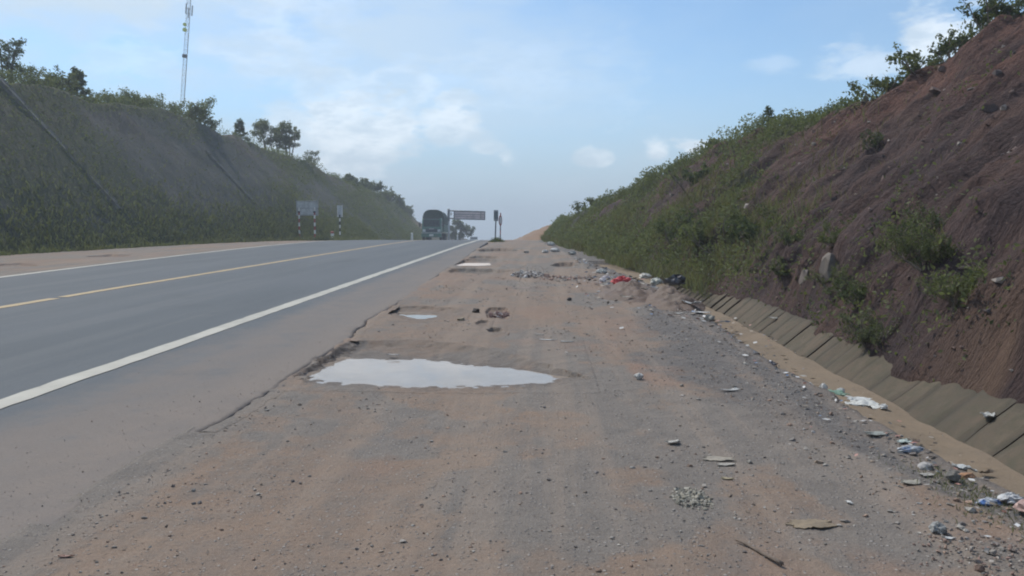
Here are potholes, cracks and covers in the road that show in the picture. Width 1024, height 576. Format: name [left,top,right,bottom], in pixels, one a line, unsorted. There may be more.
pothole [476,307,515,320]
pothole [366,305,477,322]
crack [350,302,405,341]
pothole [266,338,601,394]
crack [200,376,308,432]
